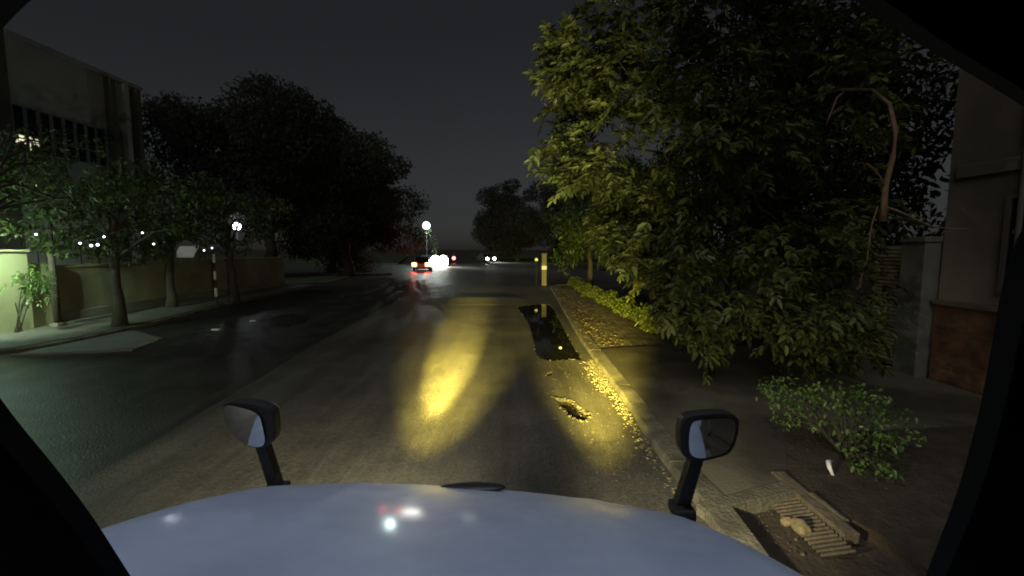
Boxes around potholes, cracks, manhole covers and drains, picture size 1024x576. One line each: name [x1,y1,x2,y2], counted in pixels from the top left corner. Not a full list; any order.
pothole [517,304,581,361]
pothole [551,396,591,422]
drain grate [772,497,856,558]
